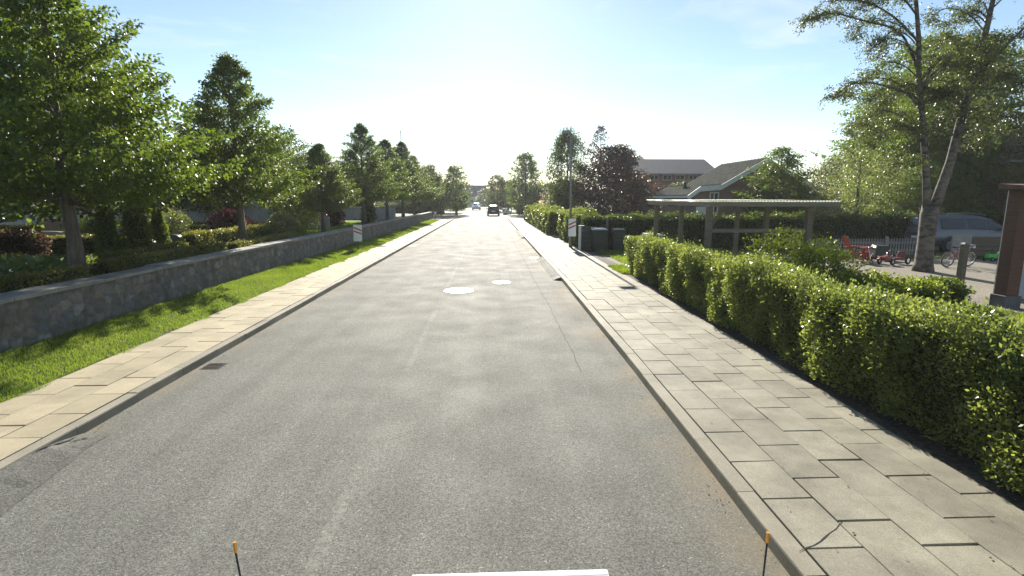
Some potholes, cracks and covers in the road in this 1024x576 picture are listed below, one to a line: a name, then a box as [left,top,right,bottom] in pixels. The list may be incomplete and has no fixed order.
crack [800,521,843,551]
